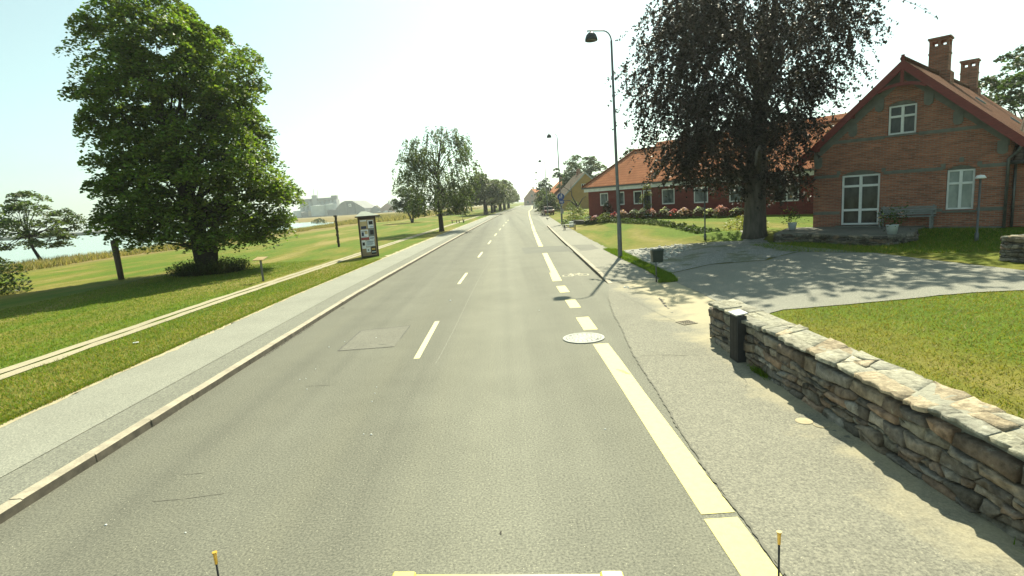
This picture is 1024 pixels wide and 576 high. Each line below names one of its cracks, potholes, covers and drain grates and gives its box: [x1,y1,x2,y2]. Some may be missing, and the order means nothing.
manhole cover [563,332,605,343]
